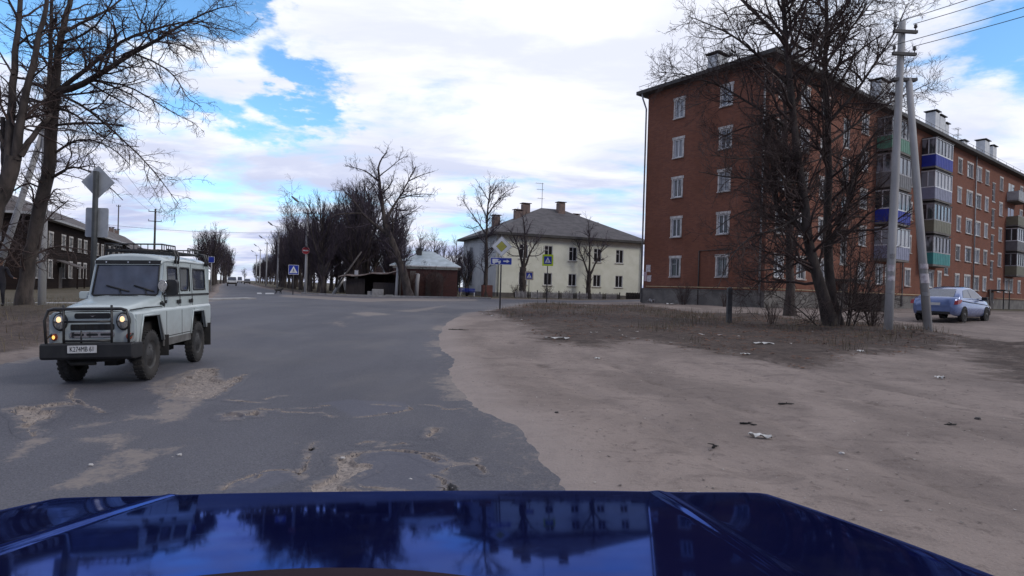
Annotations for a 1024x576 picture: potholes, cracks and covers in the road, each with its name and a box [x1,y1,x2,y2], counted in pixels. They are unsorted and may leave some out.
pothole [435,479,472,491]
crack [217,394,478,420]
pothole [208,410,250,422]
crack [347,439,498,491]
pothole [296,450,386,492]
pothole [415,426,450,441]
pothole [149,368,252,405]
